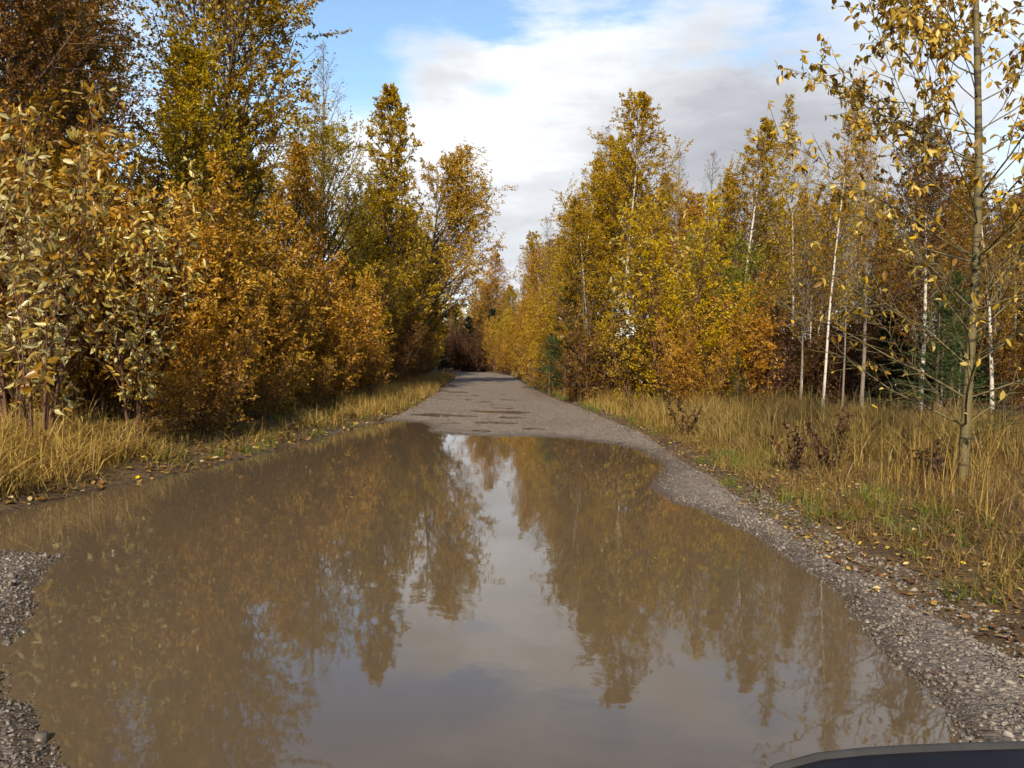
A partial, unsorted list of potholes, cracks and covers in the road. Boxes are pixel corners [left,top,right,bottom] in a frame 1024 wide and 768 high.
pothole [0,420,987,768]
